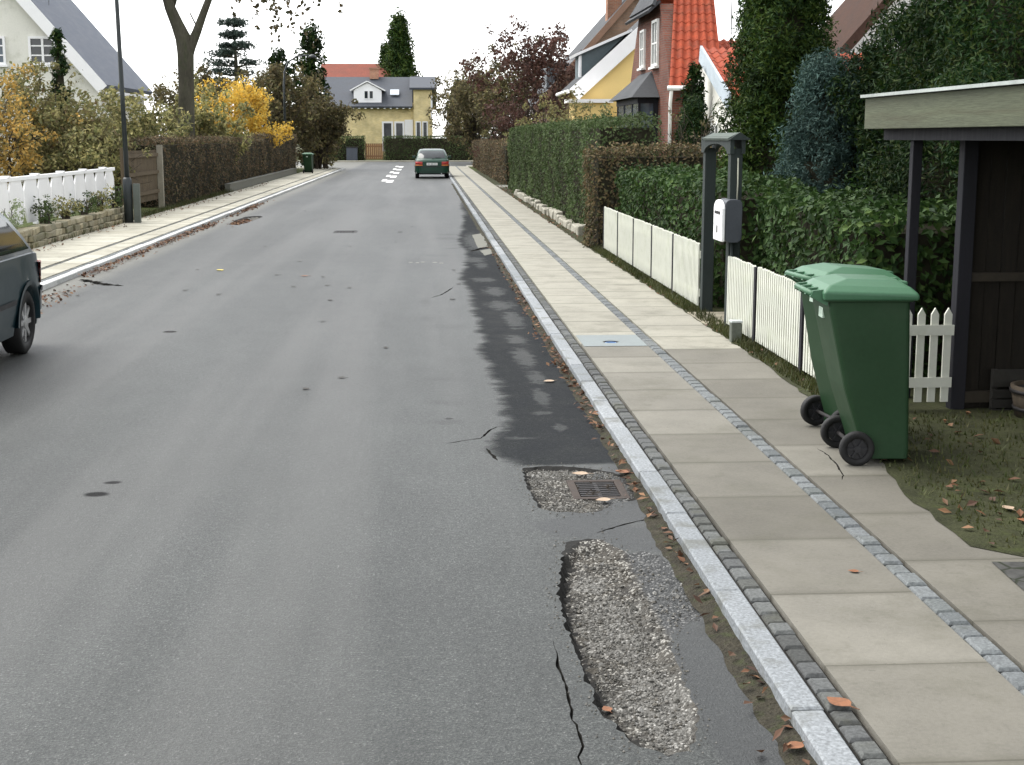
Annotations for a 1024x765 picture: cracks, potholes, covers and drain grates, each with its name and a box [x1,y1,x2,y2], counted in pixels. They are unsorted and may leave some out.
pothole [545,528,718,764]
crack [445,426,510,460]
drain grate [566,479,631,499]
crack [553,641,584,765]
pothole [511,463,636,517]
